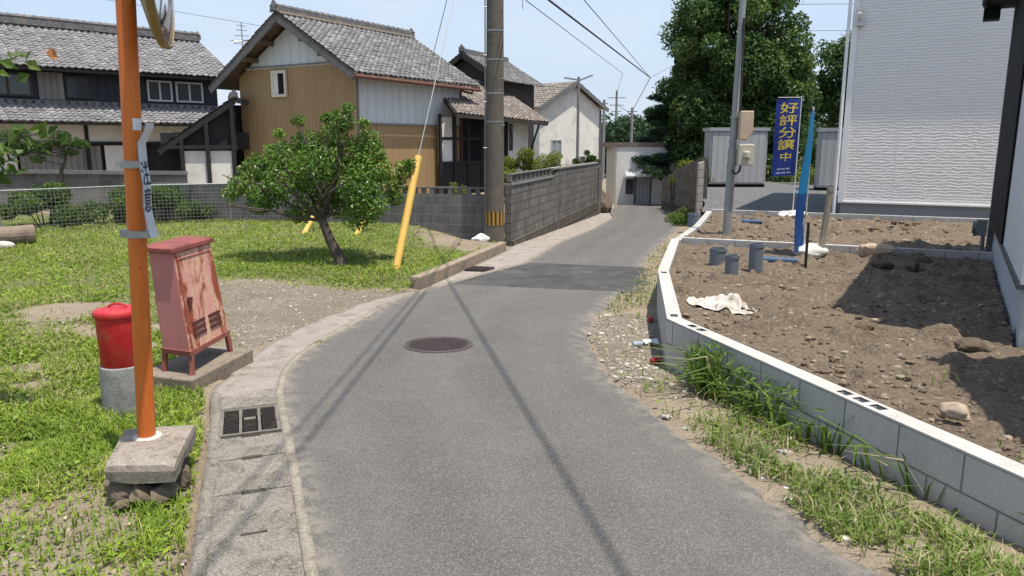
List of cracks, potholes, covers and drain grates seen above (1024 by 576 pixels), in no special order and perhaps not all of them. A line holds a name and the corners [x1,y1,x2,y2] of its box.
manhole cover [404,336,473,353]
drain grate [219,404,281,439]
